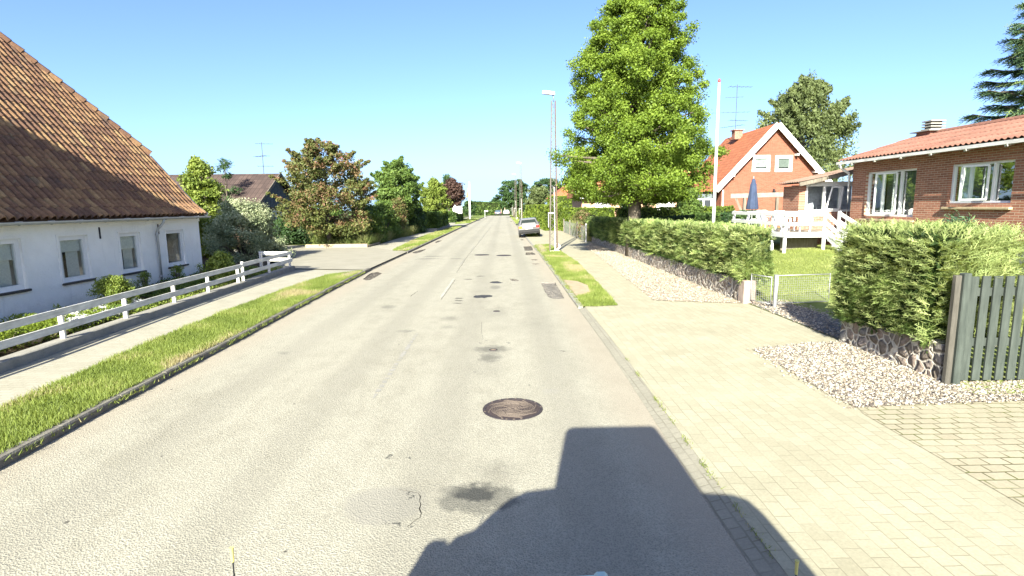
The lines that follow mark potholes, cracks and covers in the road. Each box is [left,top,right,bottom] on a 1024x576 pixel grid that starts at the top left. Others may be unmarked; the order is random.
manhole cover [483,398,543,421]
